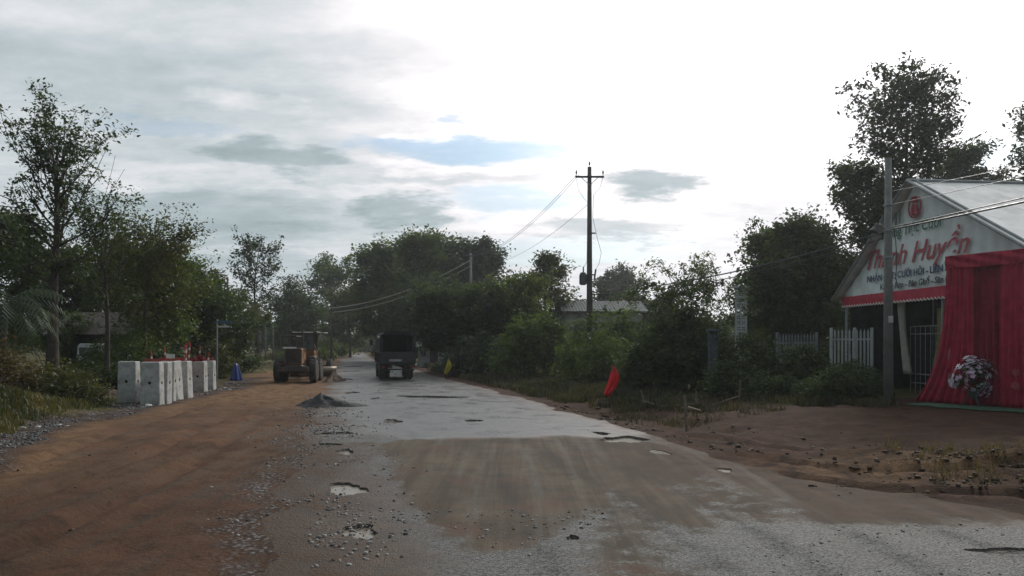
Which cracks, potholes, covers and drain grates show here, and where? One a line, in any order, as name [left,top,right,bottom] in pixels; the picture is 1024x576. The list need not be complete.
pothole [340,524,379,539]
pothole [599,435,650,443]
pothole [326,482,369,496]
